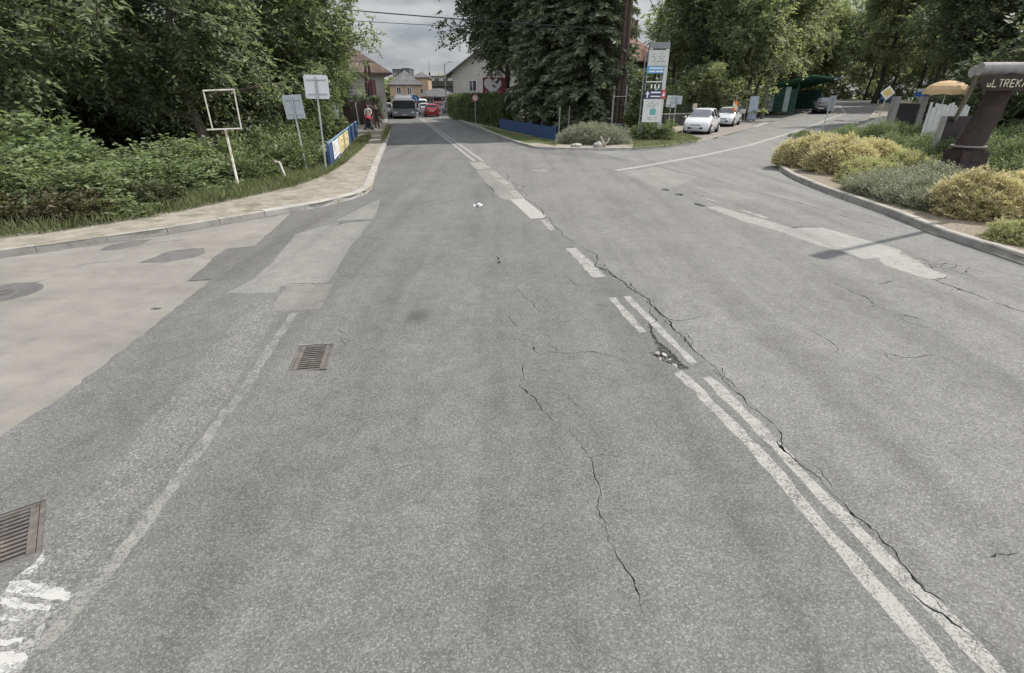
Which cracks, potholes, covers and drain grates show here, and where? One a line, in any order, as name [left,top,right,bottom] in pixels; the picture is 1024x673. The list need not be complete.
crack [499,276,624,421]
pothole [648,323,688,370]
drain grate [288,344,334,371]
crack [833,280,944,329]
crack [910,258,1024,312]
crack [569,429,646,622]
drain grate [0,499,46,567]
